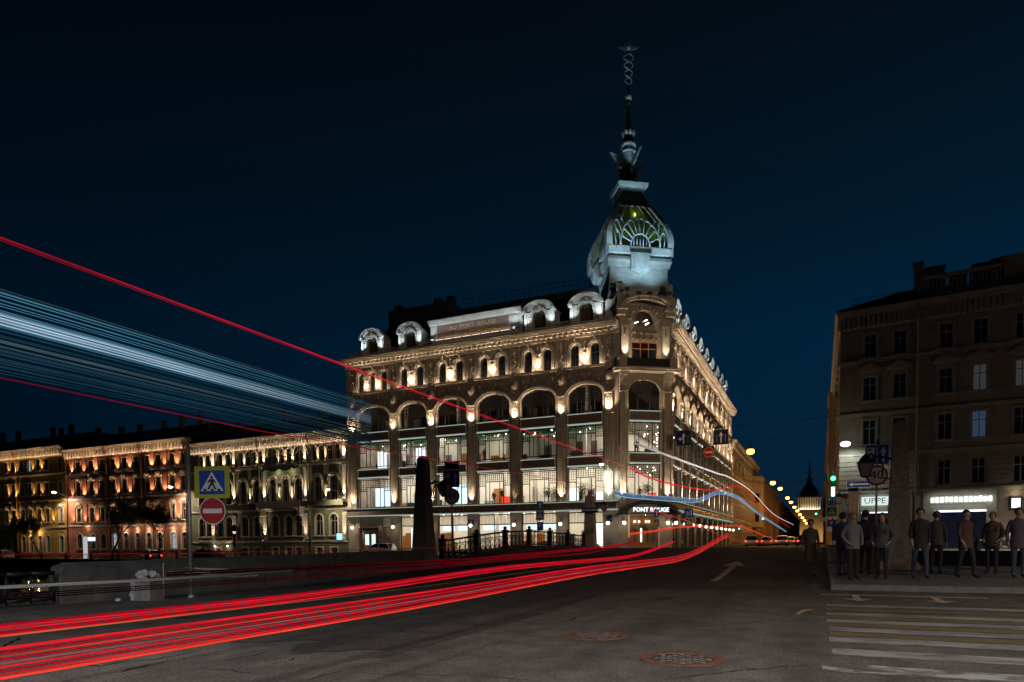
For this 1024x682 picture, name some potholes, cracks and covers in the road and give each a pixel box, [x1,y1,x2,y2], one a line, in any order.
manhole cover [562,631,629,641]
manhole cover [640,651,726,667]
